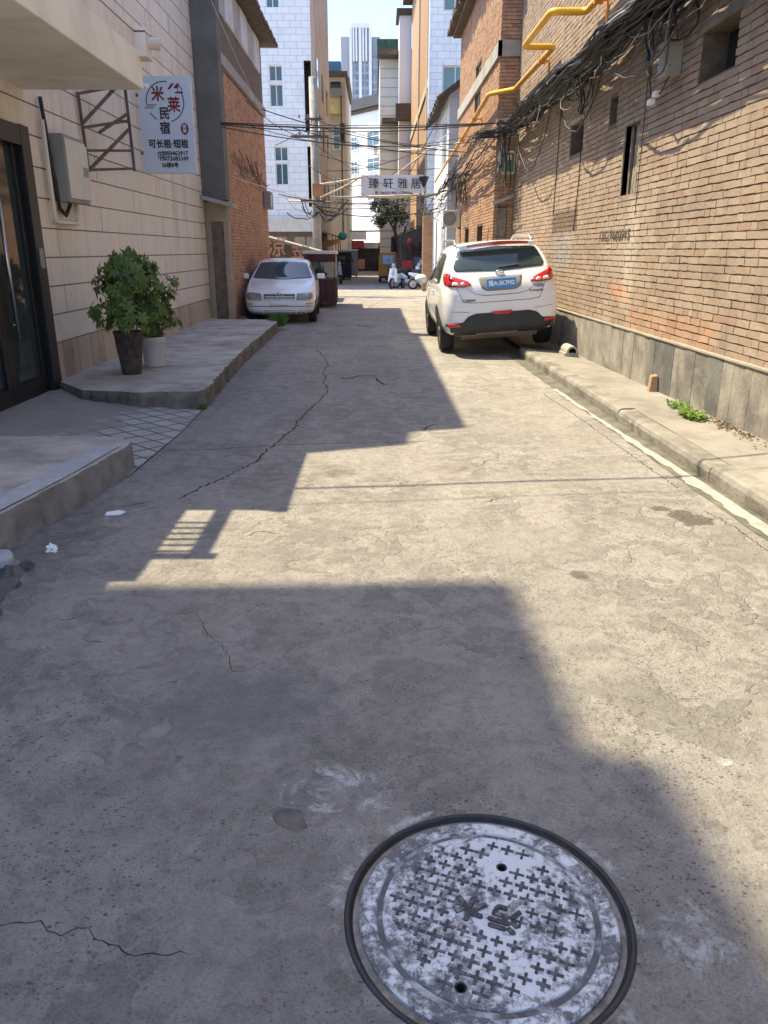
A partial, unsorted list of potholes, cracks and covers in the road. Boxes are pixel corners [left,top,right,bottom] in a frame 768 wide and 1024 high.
manhole cover [344,814,637,1024]
crack [188,613,247,673]
crack [165,350,447,499]
crack [0,920,195,956]
pothole [273,808,308,833]
